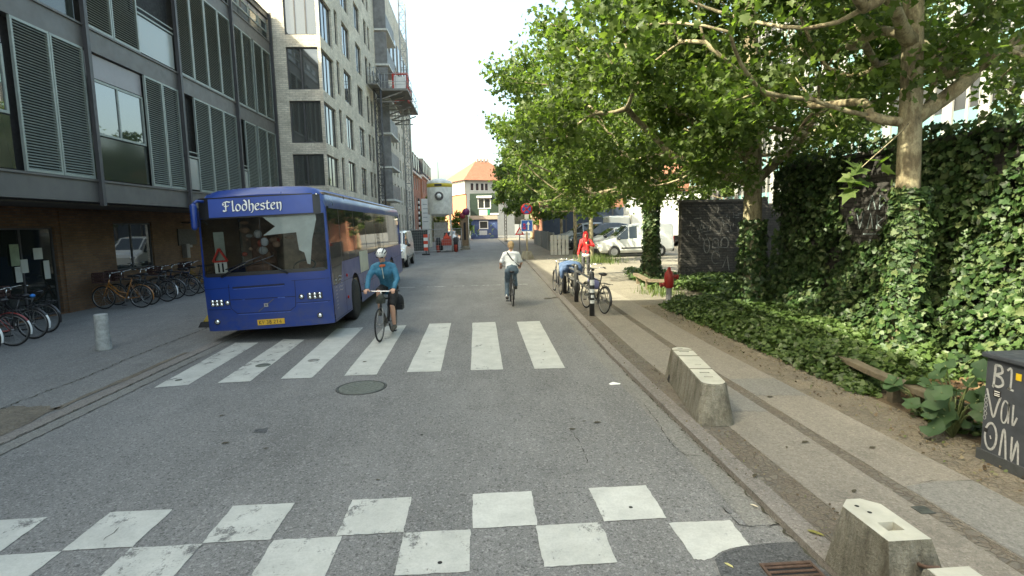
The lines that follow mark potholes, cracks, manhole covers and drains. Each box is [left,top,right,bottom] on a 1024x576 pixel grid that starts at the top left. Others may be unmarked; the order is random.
drain grate [759,560,825,576]
manhole cover [335,380,387,395]
